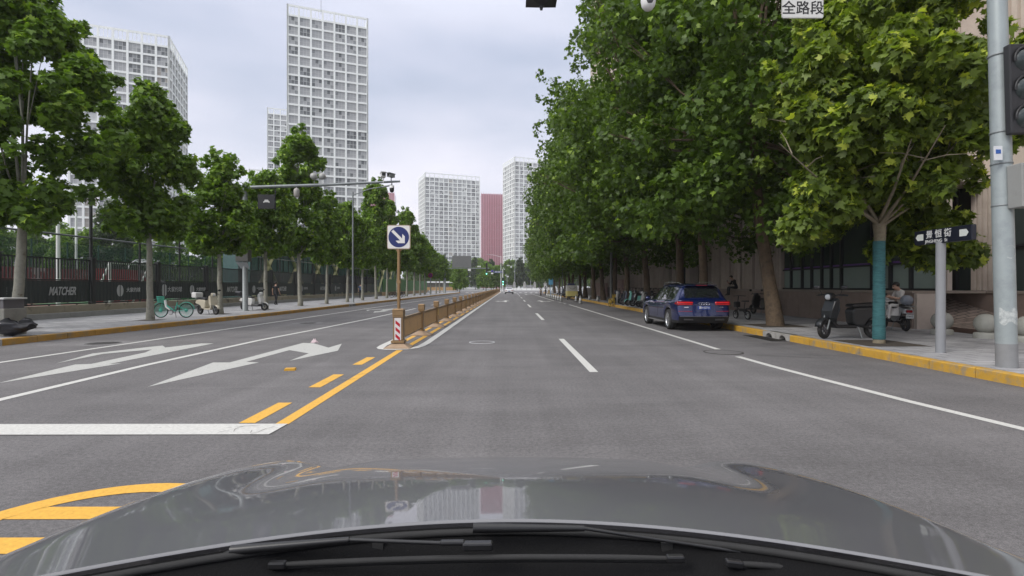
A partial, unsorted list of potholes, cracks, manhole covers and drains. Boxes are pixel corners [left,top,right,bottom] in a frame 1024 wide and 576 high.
drain grate [763,331,795,341]
